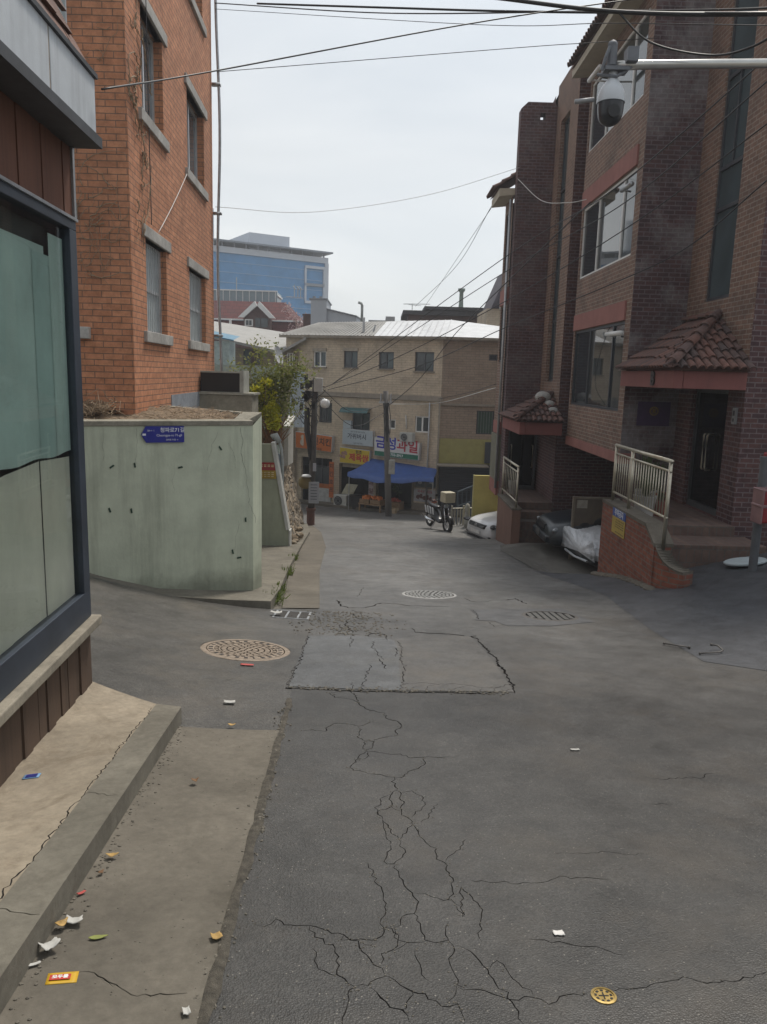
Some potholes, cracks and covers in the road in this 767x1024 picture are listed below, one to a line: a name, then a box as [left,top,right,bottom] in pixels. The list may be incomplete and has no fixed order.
manhole cover [200,639,290,661]
crack [259,691,766,1024]
crack [318,588,527,693]
manhole cover [402,590,457,599]
drain grate [272,610,312,620]
